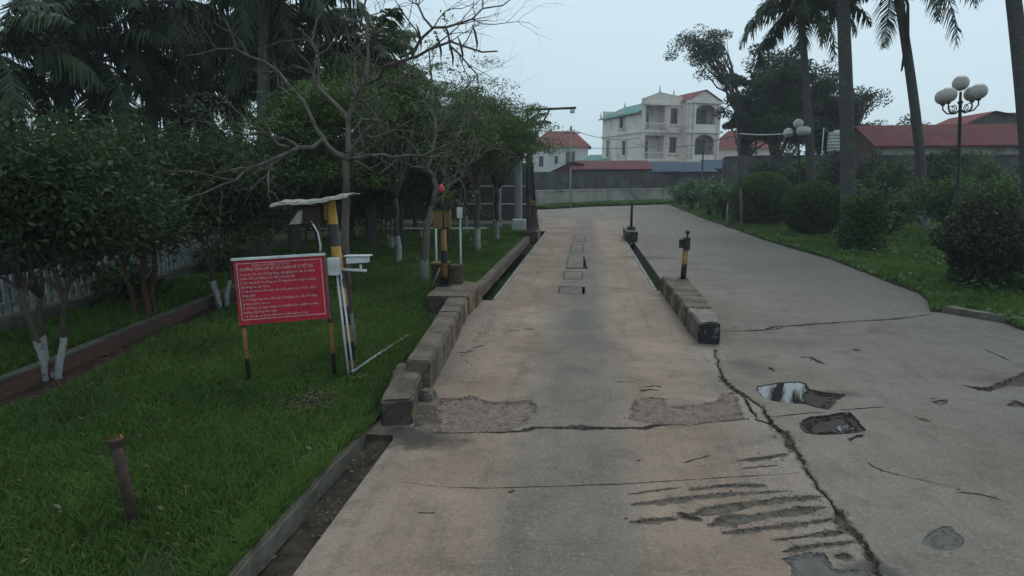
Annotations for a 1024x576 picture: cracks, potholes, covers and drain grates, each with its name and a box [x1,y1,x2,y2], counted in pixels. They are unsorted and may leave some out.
manhole cover [568,245,584,258]
pothole [799,412,866,435]
crack [404,350,1001,576]
manhole cover [564,256,587,274]
manhole cover [560,272,582,287]
pothole [756,381,846,410]
manhole cover [558,287,585,297]
